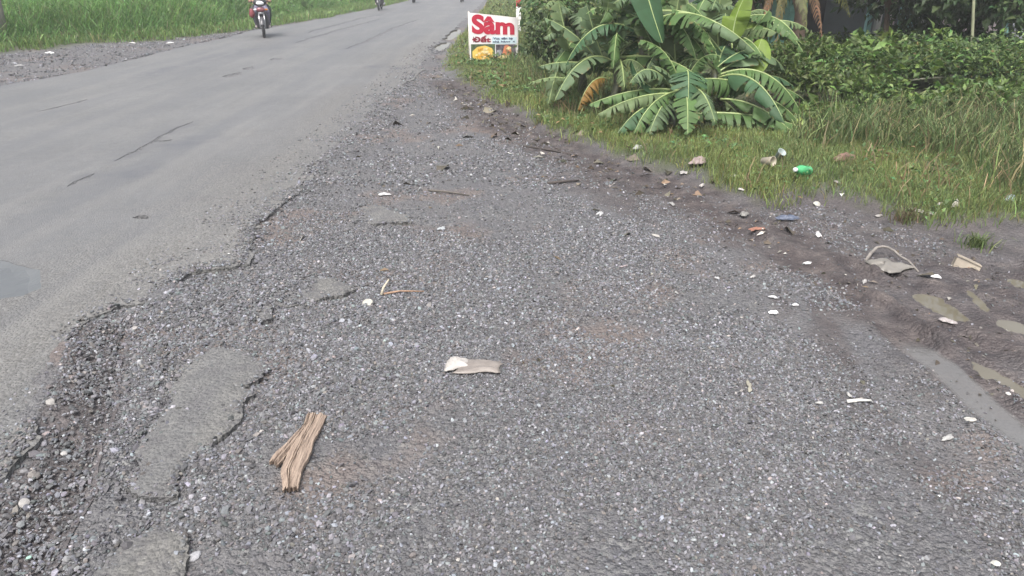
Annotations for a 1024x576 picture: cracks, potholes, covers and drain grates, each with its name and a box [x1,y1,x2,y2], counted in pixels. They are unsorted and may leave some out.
pothole [0,314,134,576]
pothole [0,260,41,299]
